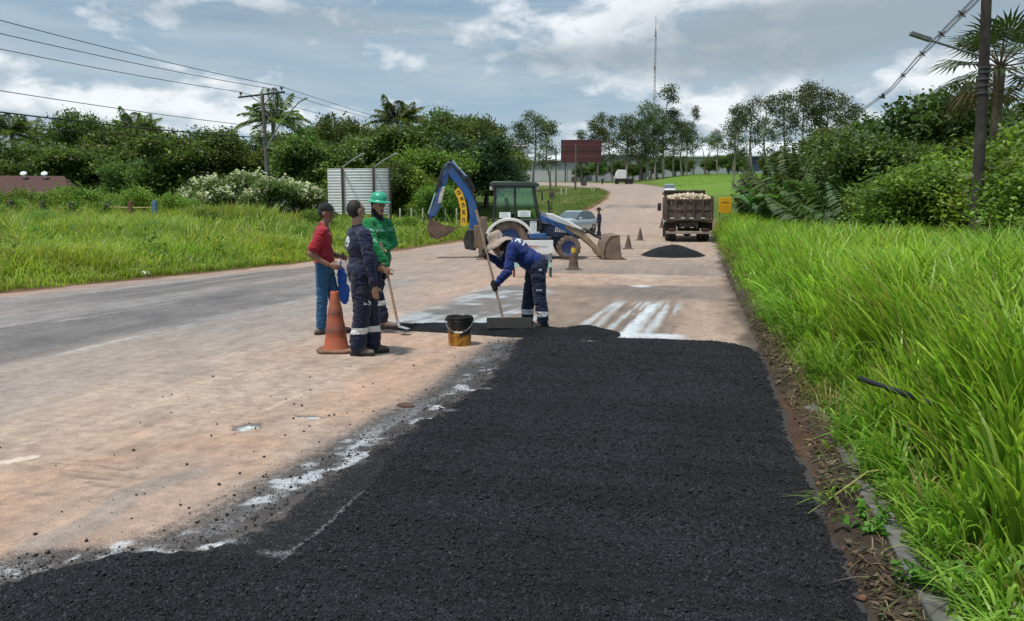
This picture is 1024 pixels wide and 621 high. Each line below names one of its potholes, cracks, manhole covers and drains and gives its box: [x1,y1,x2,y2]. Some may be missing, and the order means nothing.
pothole [230,422,264,431]
